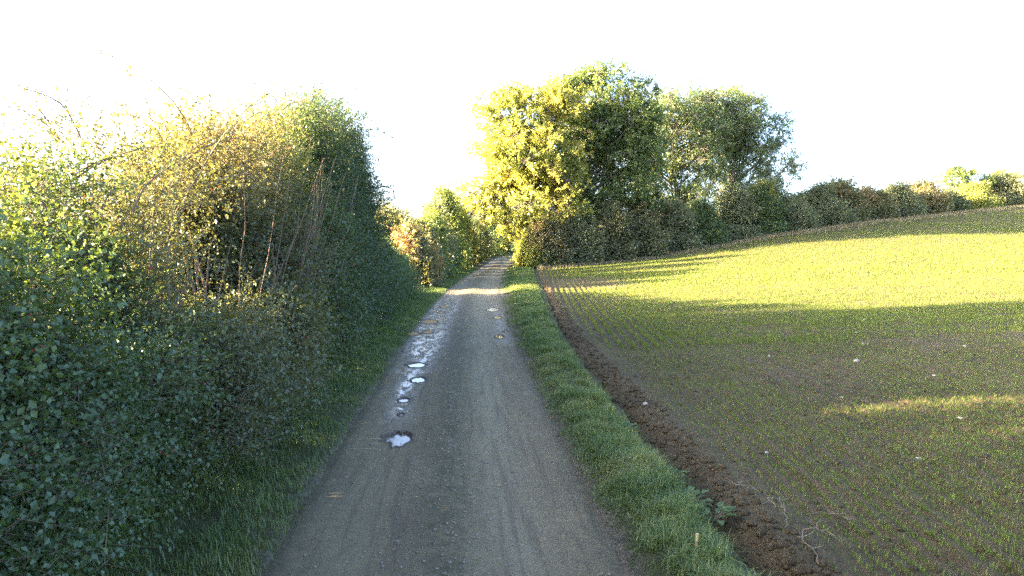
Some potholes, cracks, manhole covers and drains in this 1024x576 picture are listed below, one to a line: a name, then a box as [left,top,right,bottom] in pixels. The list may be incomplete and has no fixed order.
pothole [378,430,415,450]
pothole [410,376,428,384]
